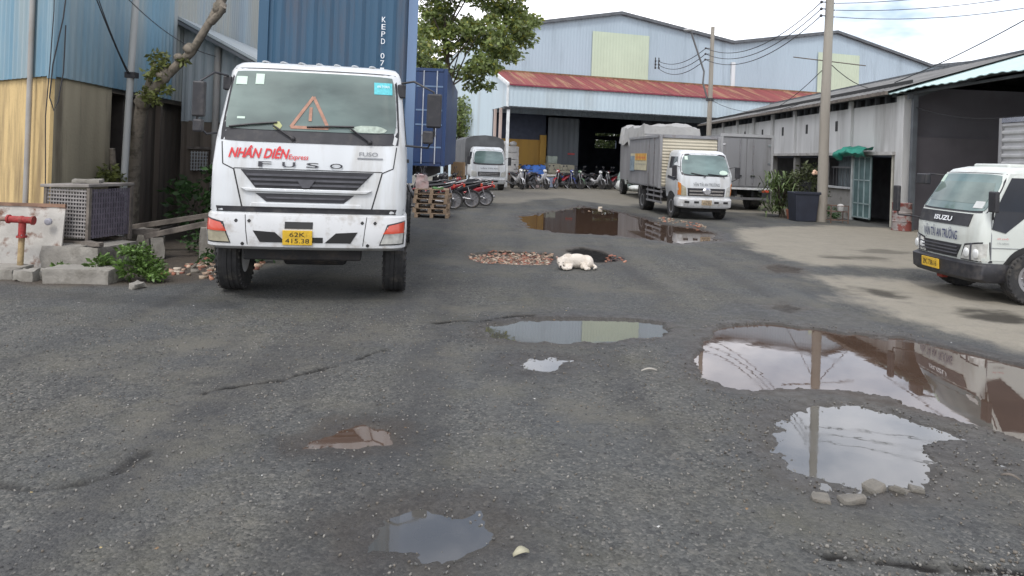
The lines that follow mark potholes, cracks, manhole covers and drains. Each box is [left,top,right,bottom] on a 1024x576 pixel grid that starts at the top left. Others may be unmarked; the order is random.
pothole [687,321,1024,444]
crack [429,314,537,325]
pothole [758,396,994,503]
crack [0,447,158,493]
pothole [341,495,523,576]
pothole [563,247,620,263]
pothole [478,315,680,345]
pothole [514,205,726,244]
crack [202,347,393,395]
pothole [503,352,584,372]
pothole [294,419,405,454]
